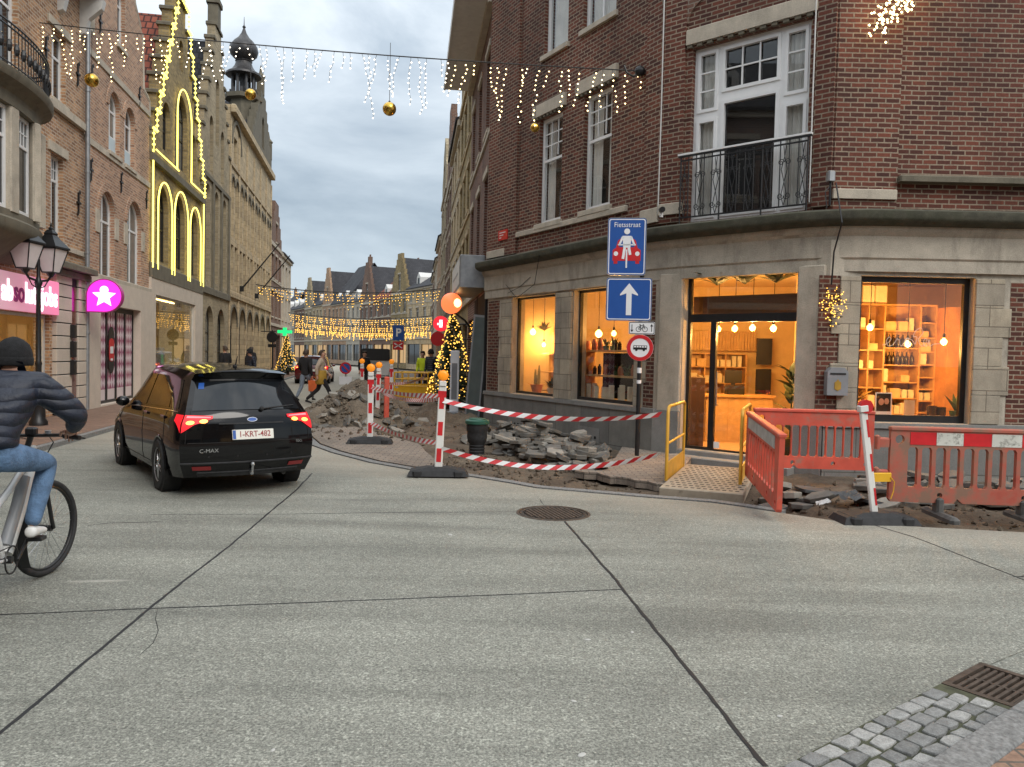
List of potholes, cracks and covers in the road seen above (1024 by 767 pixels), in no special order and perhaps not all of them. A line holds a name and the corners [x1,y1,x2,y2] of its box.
drain grate [941,662,1024,707]
manhole cover [516,505,591,521]
